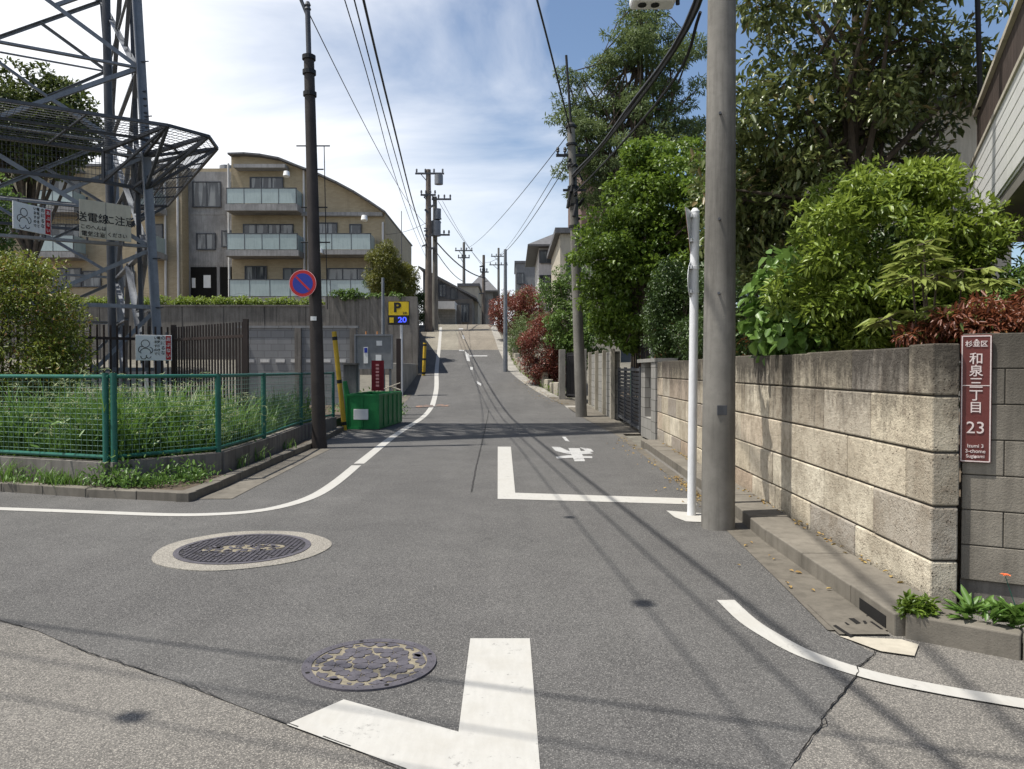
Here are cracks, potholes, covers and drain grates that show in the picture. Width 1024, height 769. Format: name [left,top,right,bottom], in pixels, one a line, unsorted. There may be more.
crack [793,649,877,761]
manhole cover [152,531,332,571]
manhole cover [301,639,436,692]
